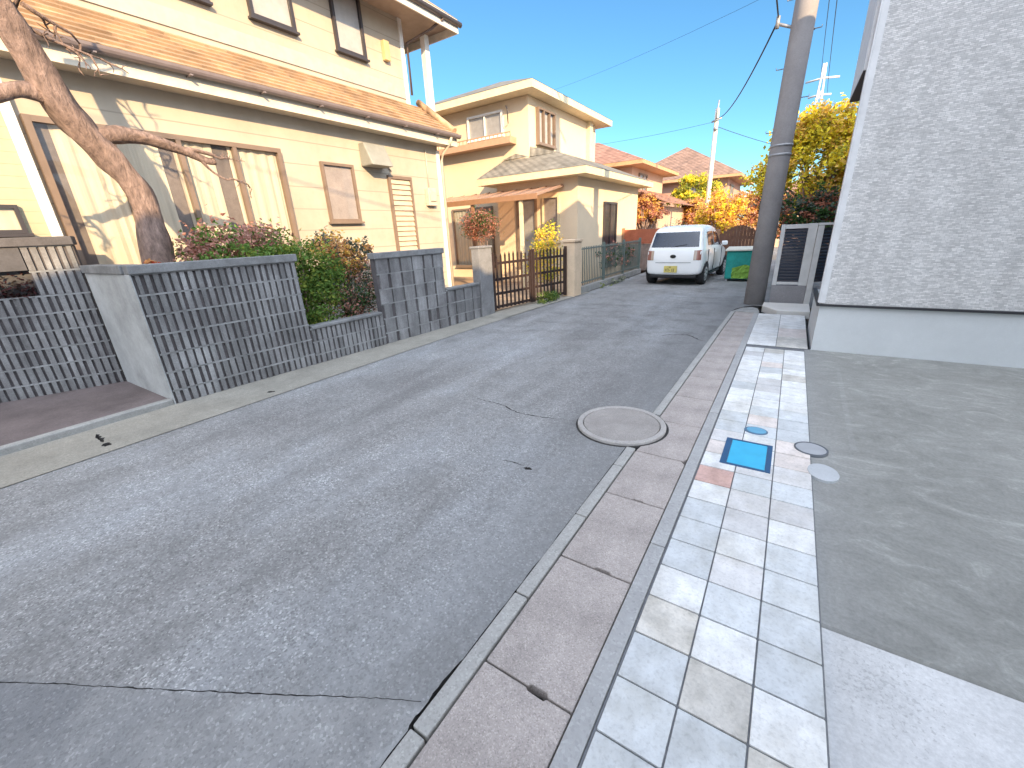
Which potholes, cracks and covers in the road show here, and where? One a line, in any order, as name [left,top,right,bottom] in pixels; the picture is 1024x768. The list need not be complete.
manhole cover [576,406,668,452]
utility cover [744,426,768,435]
